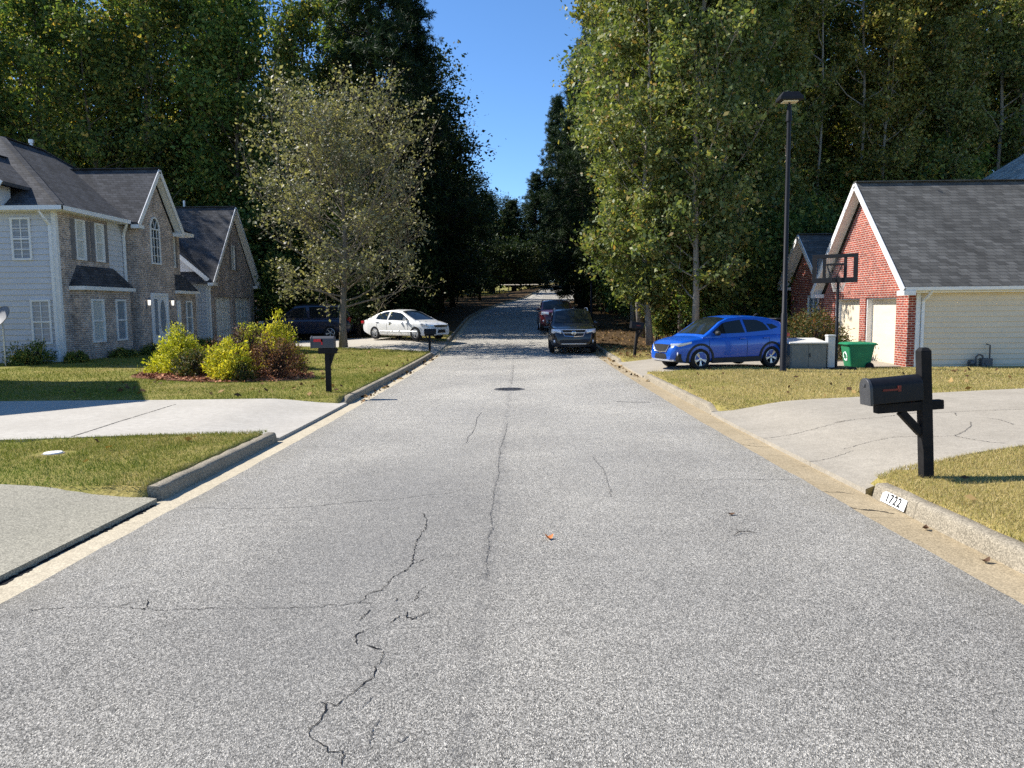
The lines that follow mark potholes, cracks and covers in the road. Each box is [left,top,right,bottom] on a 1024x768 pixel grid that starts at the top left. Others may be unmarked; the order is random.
crack [193,492,453,766]
crack [30,598,336,611]
